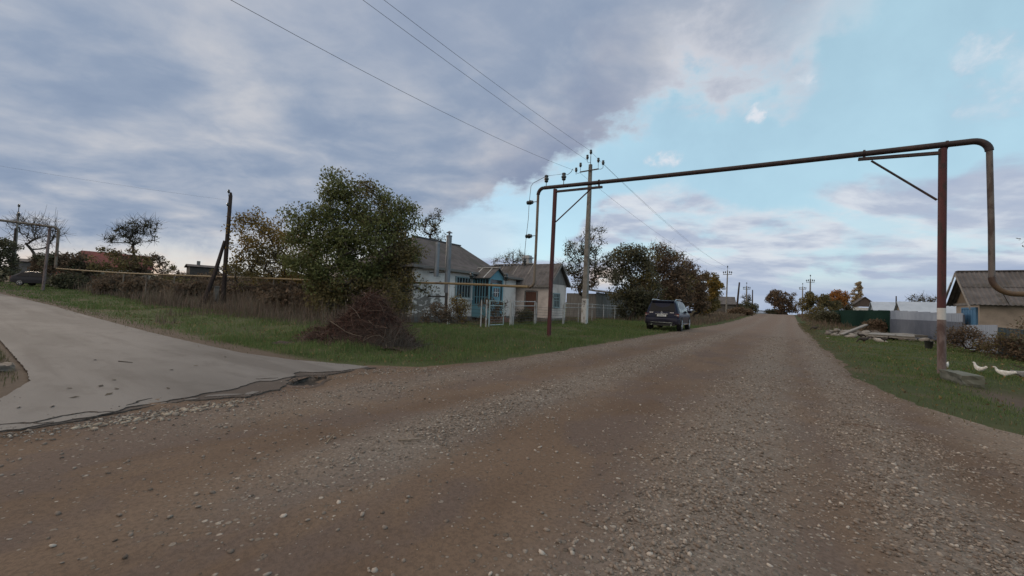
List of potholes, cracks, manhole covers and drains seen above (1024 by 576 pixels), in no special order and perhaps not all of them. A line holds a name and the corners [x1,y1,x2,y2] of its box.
crack [0,398,151,425]
pothole [285,375,332,388]
